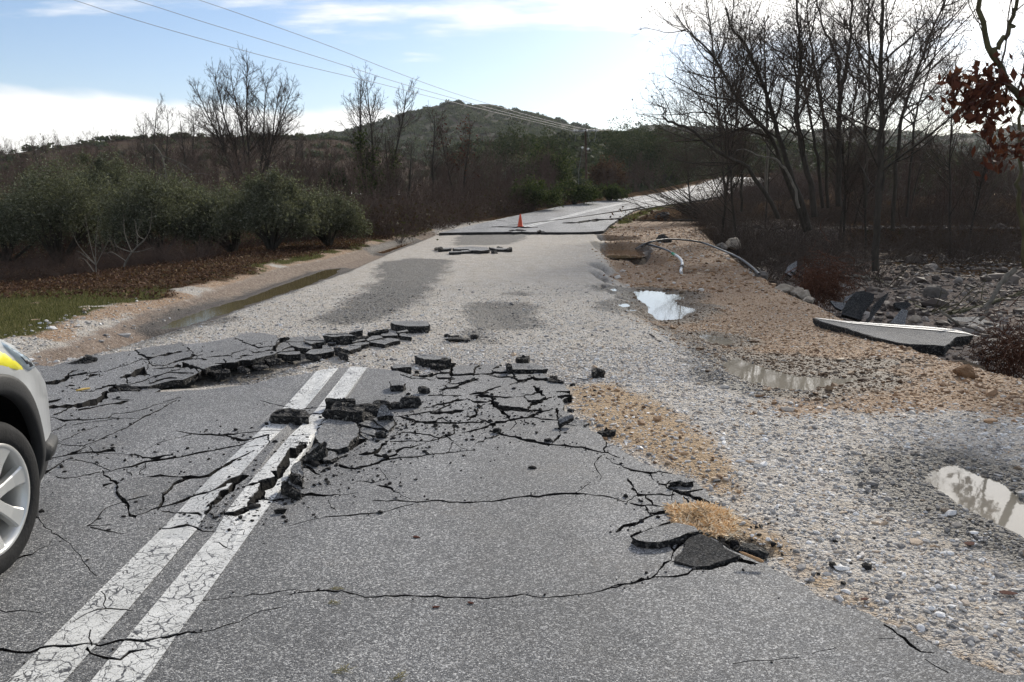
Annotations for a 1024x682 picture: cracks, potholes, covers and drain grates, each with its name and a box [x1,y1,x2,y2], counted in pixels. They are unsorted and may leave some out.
pothole [589,241,666,266]
crack [884,625,948,673]
crack [0,337,757,661]
